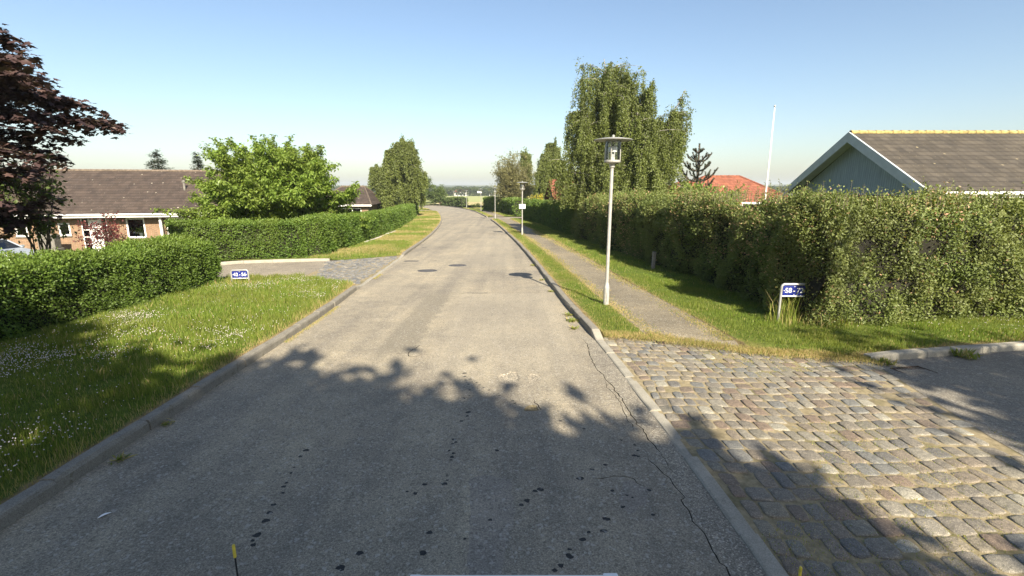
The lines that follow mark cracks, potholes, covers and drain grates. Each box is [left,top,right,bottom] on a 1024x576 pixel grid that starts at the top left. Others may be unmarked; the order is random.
crack [580,337,731,576]
